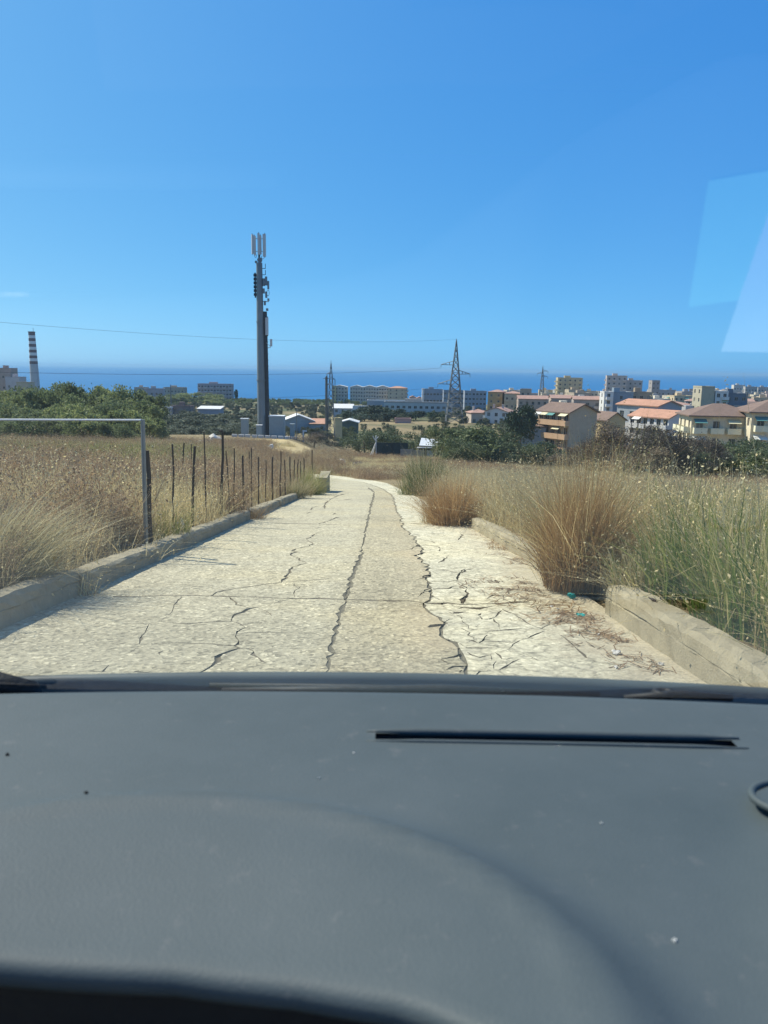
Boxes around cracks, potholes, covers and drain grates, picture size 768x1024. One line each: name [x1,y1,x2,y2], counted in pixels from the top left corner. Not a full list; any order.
crack [126,481,548,674]
